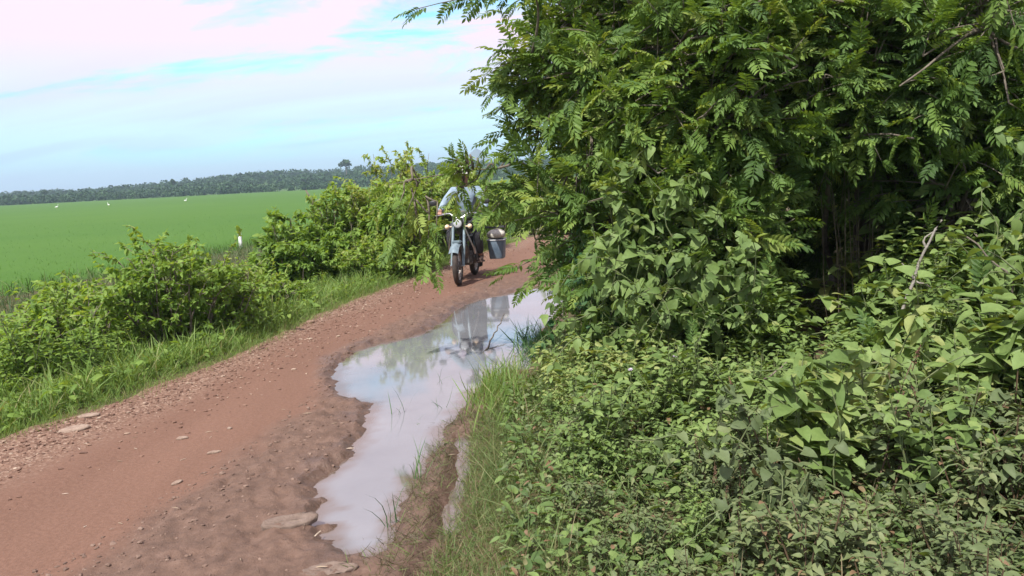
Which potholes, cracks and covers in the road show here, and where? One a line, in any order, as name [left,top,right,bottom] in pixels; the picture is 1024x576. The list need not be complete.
pothole [296,283,563,560]
